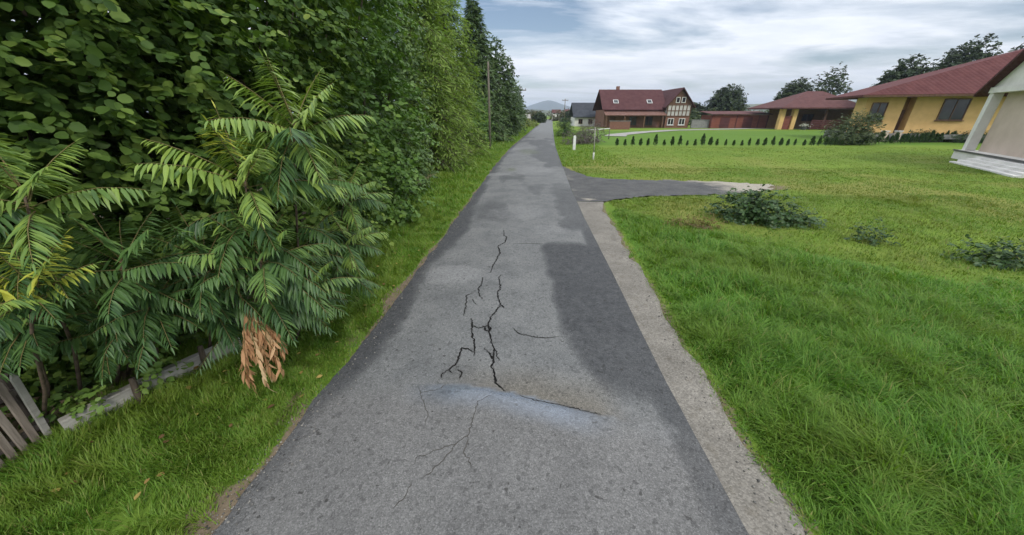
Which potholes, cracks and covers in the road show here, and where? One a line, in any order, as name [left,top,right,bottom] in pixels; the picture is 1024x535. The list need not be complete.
crack [394,231,600,507]
